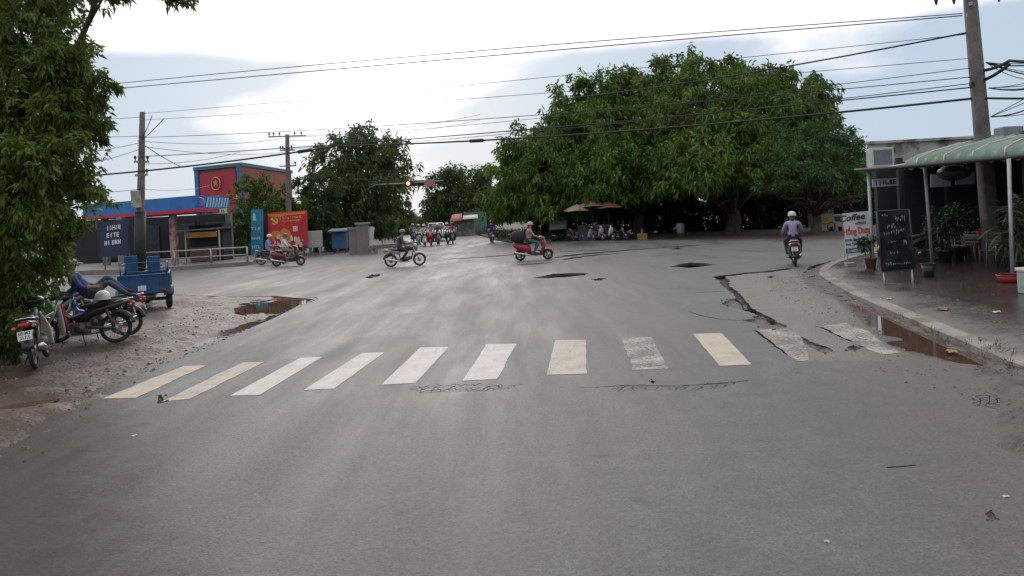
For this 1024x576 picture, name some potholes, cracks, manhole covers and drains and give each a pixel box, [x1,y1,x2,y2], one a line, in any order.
crack [691,261,830,355]
crack [963,391,1002,409]
crack [411,383,522,393]
crack [584,380,746,391]
